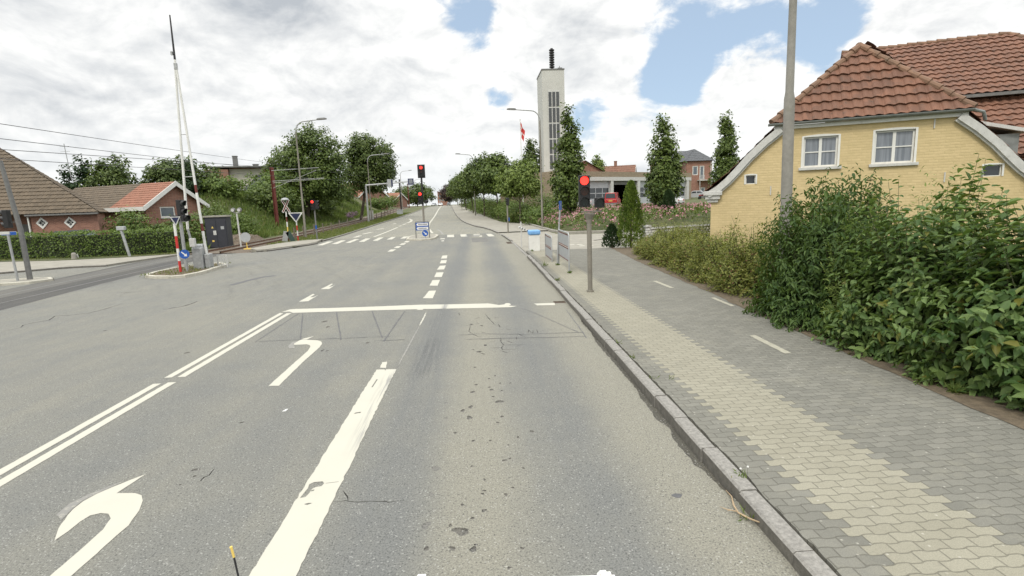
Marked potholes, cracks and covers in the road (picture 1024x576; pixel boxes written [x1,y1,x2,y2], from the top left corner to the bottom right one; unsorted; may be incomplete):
crack [334,491,407,503]
pothole [451,527,469,536]
crack [459,314,538,355]
